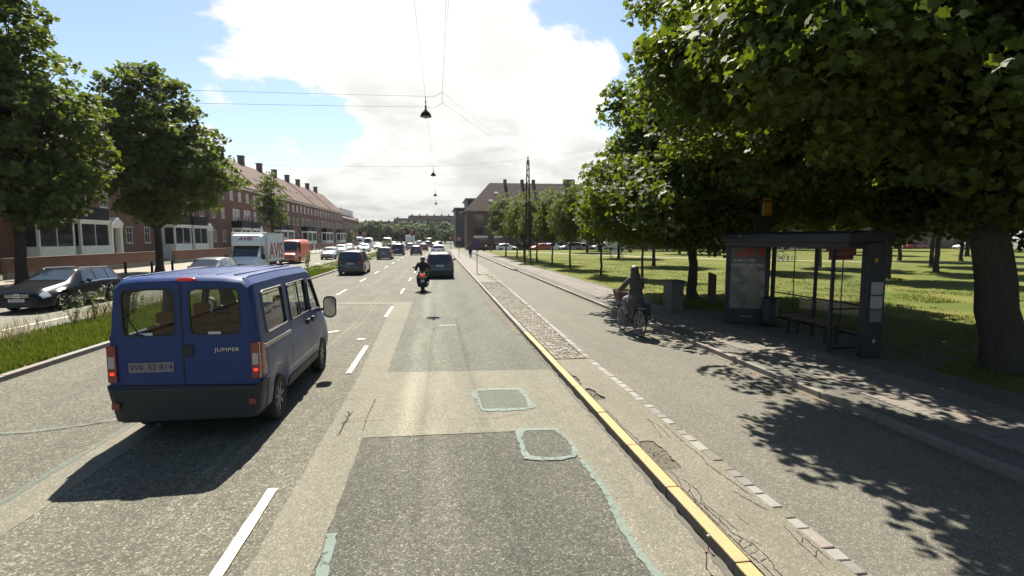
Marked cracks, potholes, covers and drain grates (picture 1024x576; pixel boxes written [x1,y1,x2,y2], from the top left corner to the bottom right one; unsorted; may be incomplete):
crack [611,414,781,576]
pothole [639,440,681,471]
pothole [585,388,605,401]
